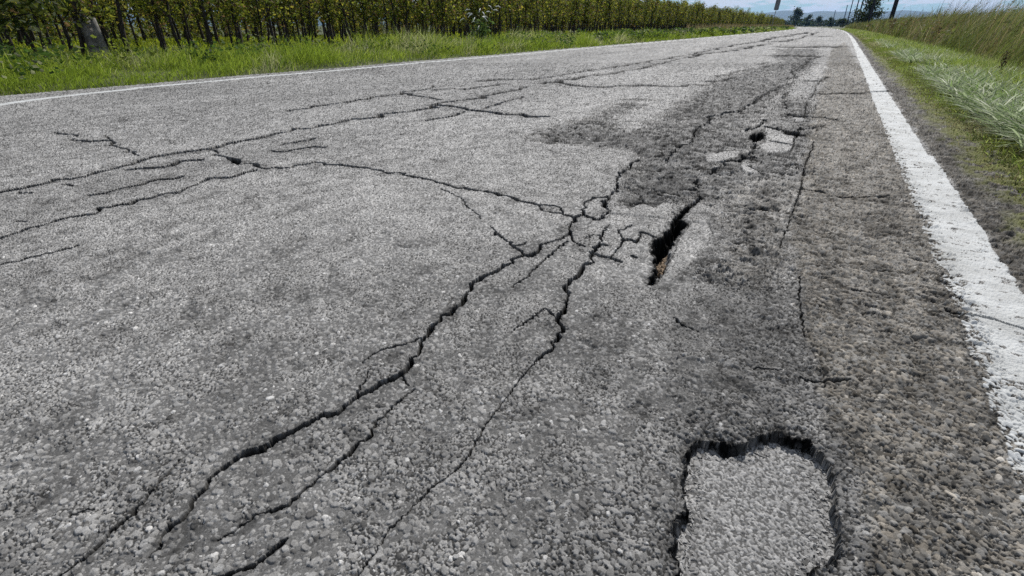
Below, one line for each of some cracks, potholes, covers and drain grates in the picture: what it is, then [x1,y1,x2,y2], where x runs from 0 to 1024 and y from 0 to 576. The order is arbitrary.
crack [220,537,288,576]
pothole [748,132,766,143]
crack [692,143,764,206]
crack [779,141,814,338]
crack [60,459,180,576]
crack [803,76,830,118]
pothole [667,429,846,576]
pothole [644,205,695,286]
crack [0,32,819,193]
crack [150,160,640,556]
crack [0,138,326,265]
